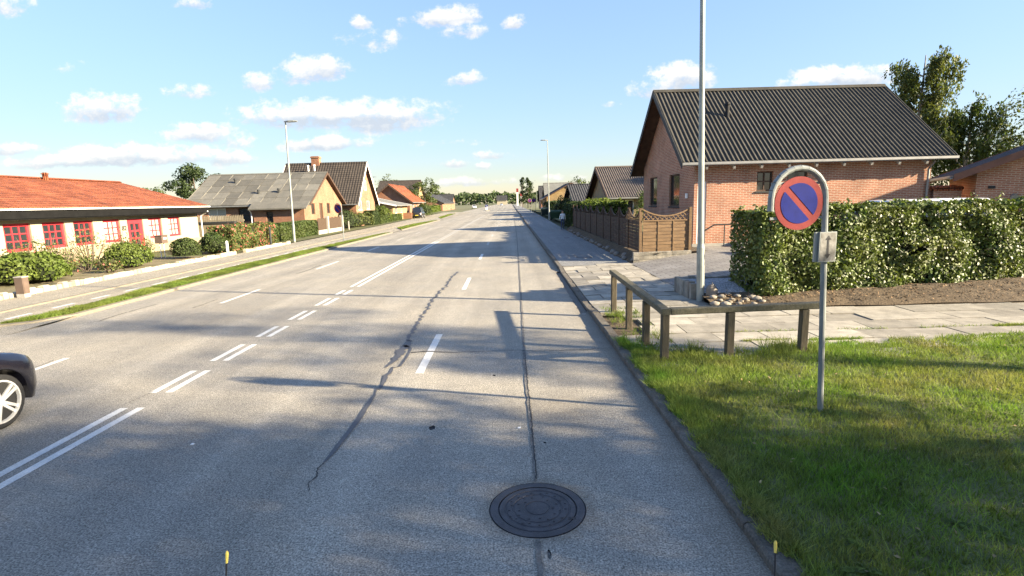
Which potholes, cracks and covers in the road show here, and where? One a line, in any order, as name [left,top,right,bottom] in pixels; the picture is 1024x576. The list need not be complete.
manhole cover [489,483,586,539]
